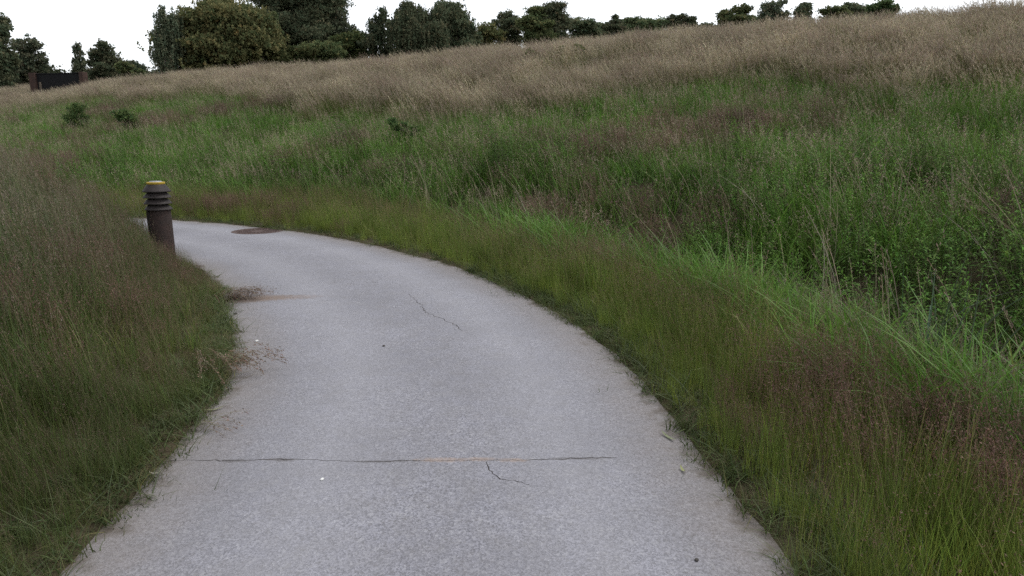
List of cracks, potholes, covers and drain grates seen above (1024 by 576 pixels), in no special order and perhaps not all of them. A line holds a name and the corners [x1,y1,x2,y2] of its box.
crack [196,457,606,482]
